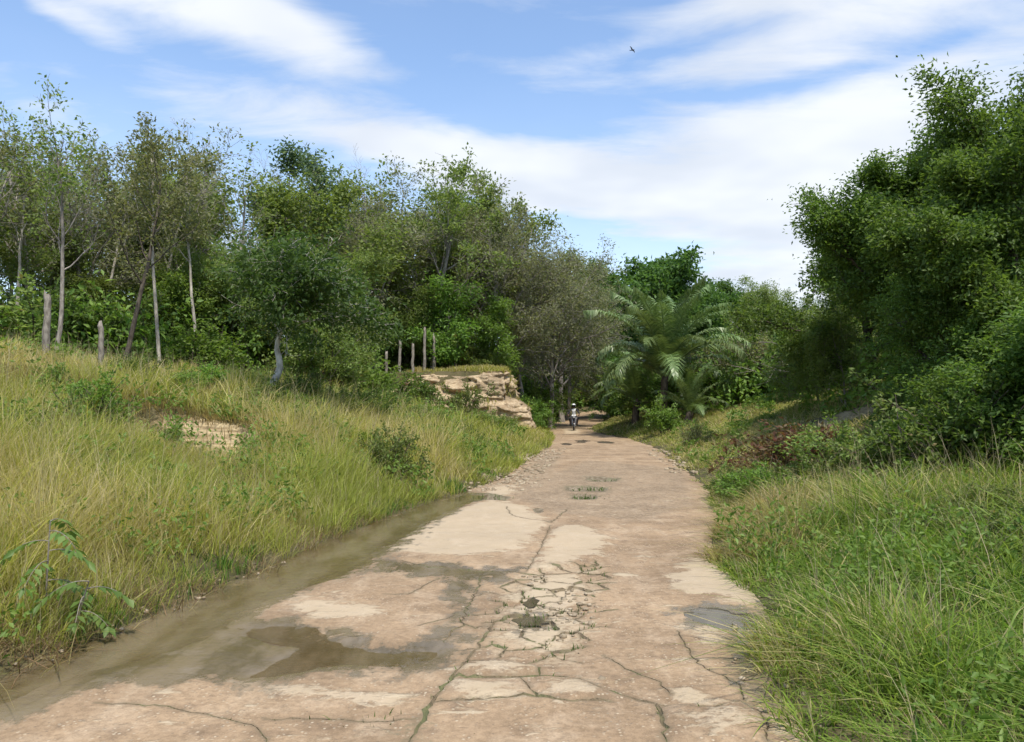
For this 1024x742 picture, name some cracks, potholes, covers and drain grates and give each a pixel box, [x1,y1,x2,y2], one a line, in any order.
pothole [511,614,550,628]
crack [105,561,770,742]
pothole [522,597,540,609]
